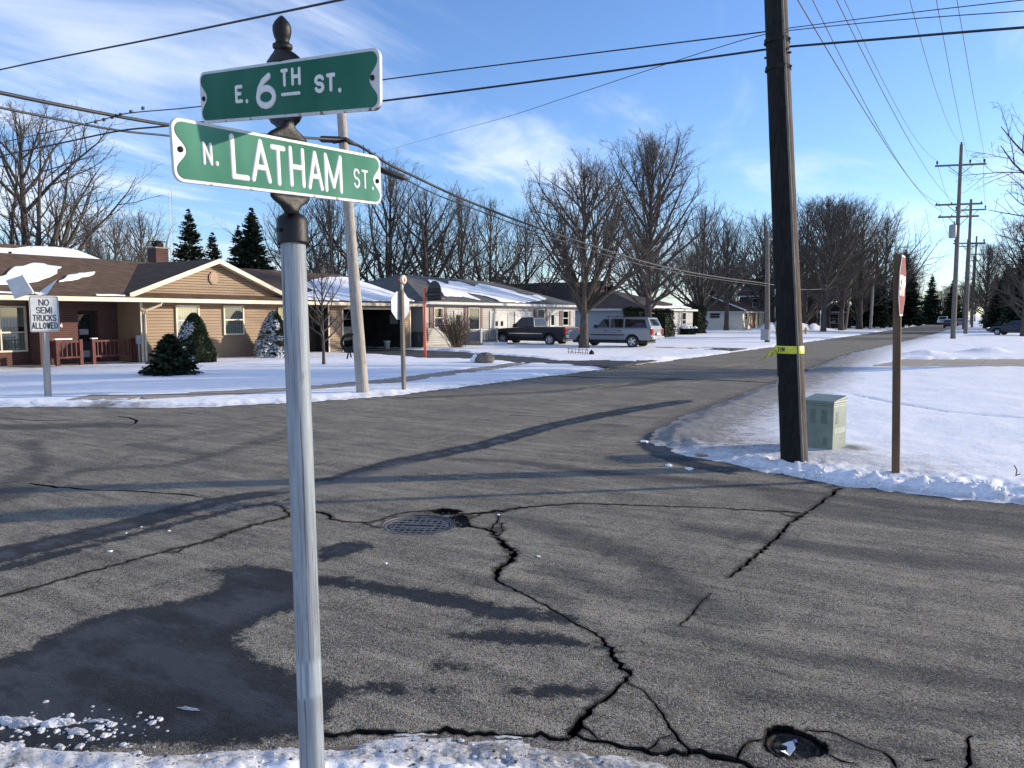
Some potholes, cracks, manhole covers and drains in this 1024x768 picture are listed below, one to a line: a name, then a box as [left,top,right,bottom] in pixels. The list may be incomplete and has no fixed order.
pothole [449,515,471,528]
crack [0,505,290,597]
crack [806,730,897,768]
crack [964,735,972,768]
crack [0,481,208,498]
crack [316,488,844,768]
manhole cover [382,515,455,534]
